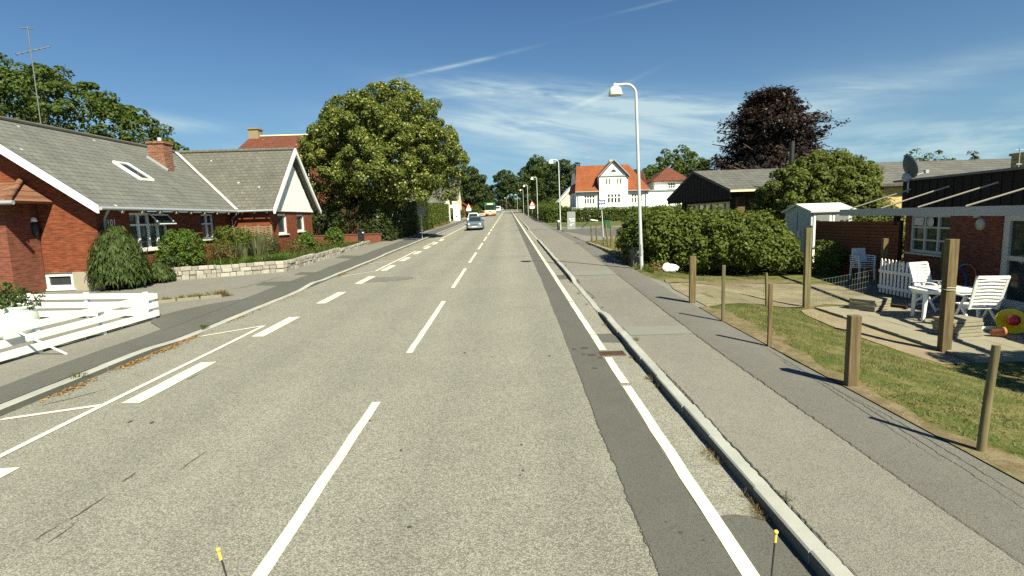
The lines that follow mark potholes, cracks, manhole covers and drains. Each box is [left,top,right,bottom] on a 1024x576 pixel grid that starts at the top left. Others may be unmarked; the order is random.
crack [37,472,136,543]
